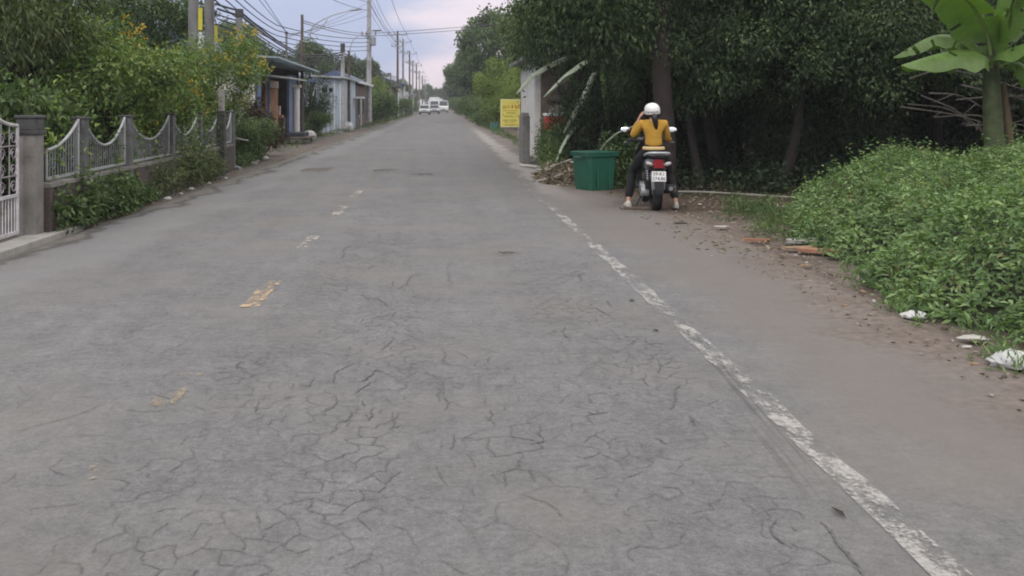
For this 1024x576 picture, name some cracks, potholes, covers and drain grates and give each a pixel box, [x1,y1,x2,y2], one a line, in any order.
crack [39,211,428,576]
crack [0,290,254,509]
crack [407,259,865,576]
